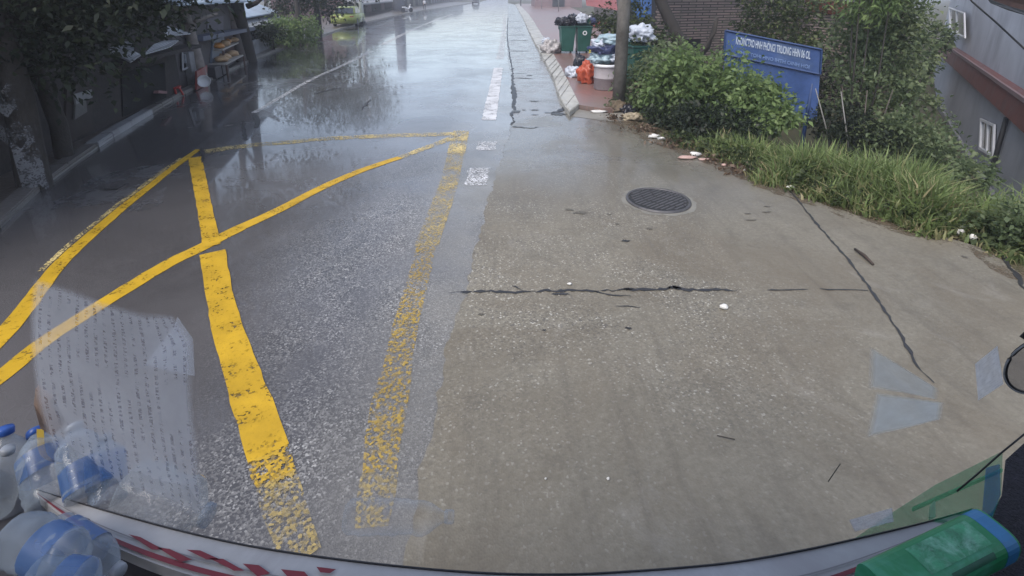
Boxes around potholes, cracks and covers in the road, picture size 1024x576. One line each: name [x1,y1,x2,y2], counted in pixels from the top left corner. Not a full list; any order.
crack [449,285,737,308]
manhole cover [626,187,692,213]
crack [998,250,1024,288]
